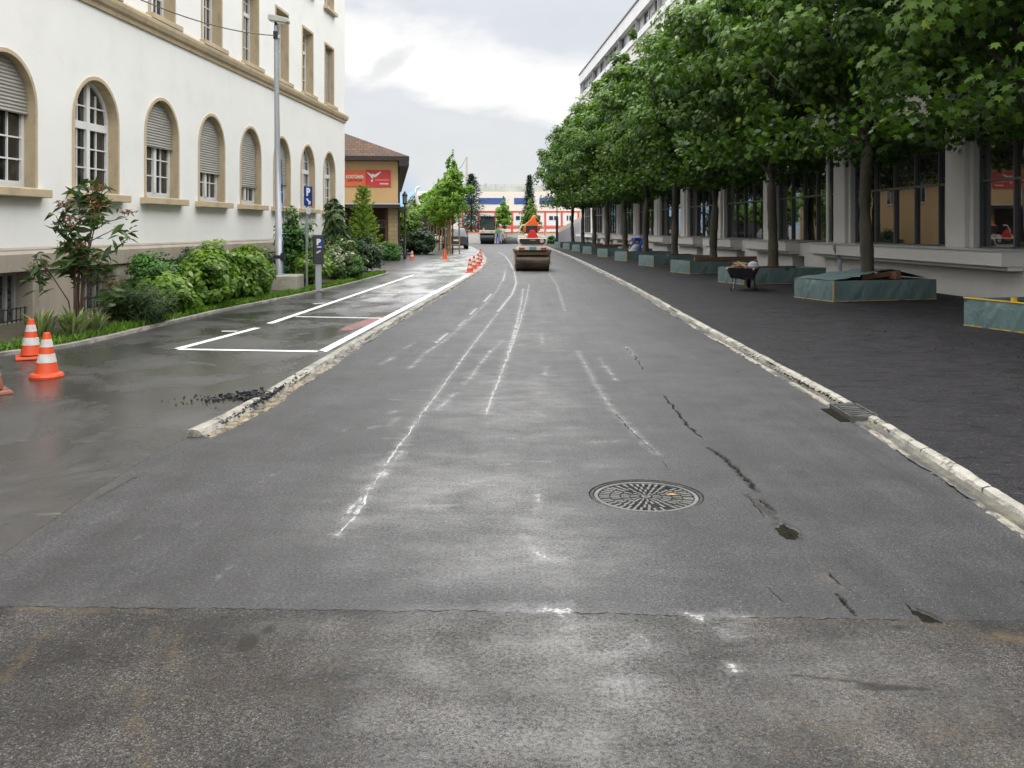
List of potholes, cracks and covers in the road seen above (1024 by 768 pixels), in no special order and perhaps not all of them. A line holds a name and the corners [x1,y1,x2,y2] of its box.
pothole [772,521,802,540]
manhole cover [589,479,704,512]
crack [627,348,774,517]
drain grate [821,403,879,422]
